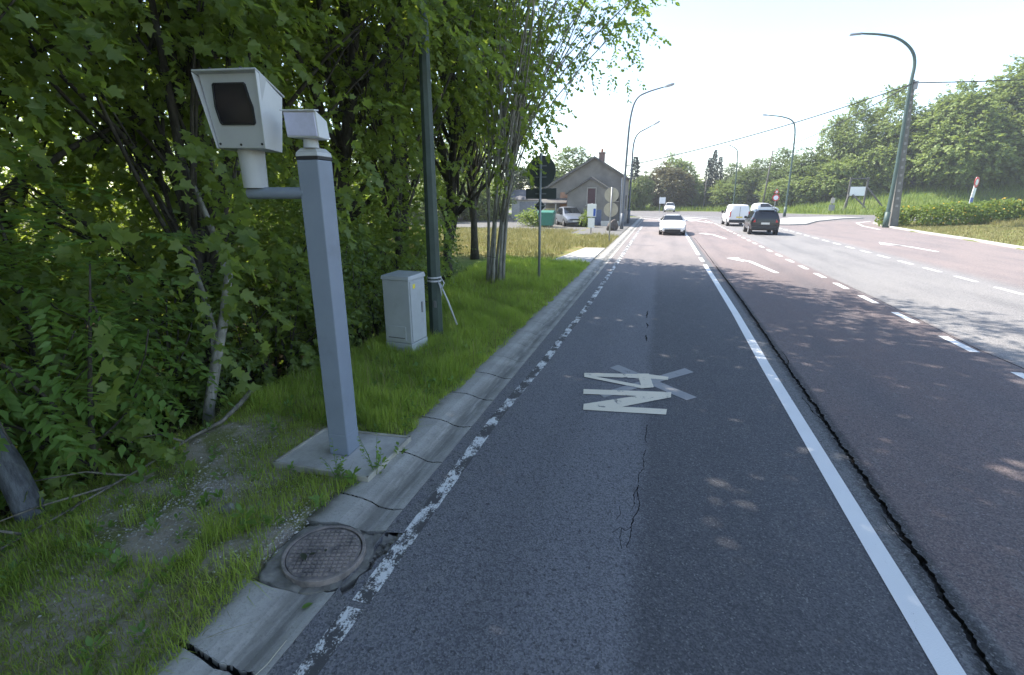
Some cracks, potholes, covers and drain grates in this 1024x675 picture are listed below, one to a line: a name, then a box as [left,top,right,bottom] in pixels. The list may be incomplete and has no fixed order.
crack [613,427,647,549]
crack [176,644,255,675]
manhole cover [281,525,374,595]
